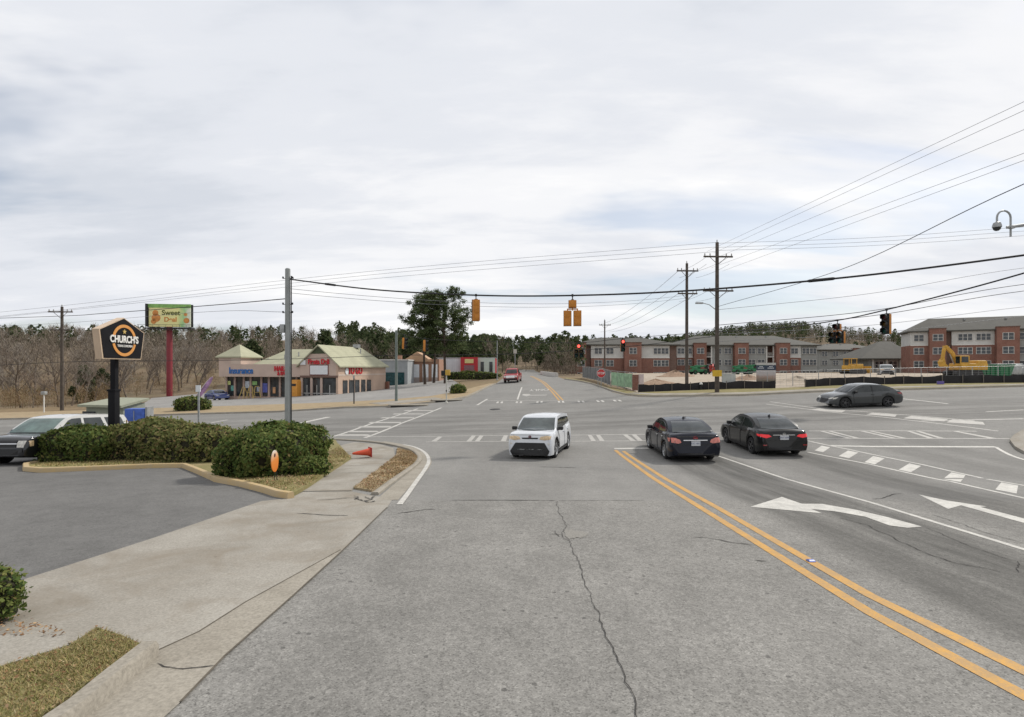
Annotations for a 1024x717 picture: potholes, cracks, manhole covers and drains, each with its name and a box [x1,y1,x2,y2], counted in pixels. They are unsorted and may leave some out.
crack [840,514,1023,571]
crack [550,500,637,717]
